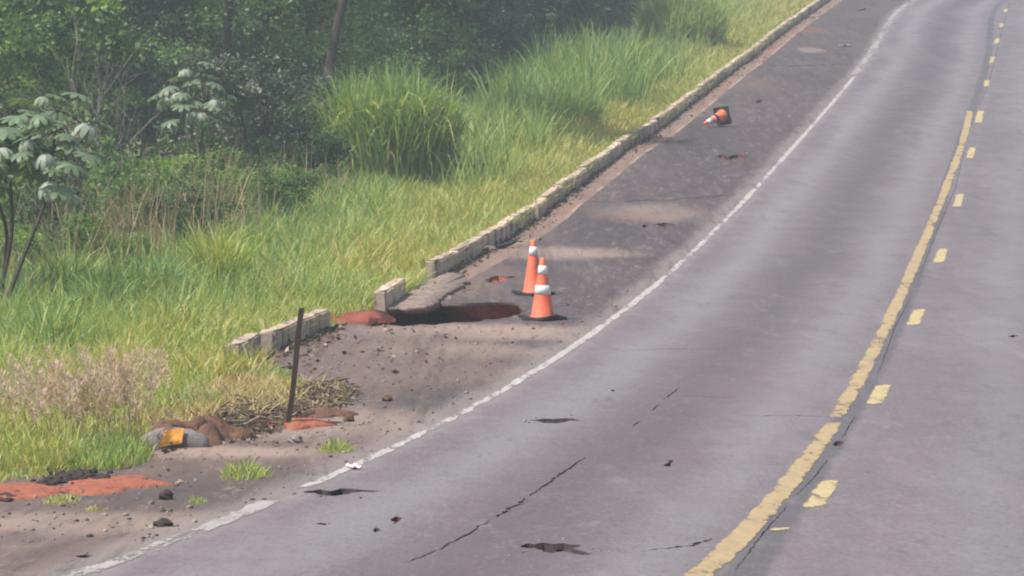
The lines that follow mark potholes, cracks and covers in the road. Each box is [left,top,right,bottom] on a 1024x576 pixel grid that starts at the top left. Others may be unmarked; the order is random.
pothole [521,543,590,555]
crack [403,457,586,563]
crack [652,538,713,550]
pothole [485,275,516,283]
crack [563,194,735,203]
pothole [303,488,377,496]
